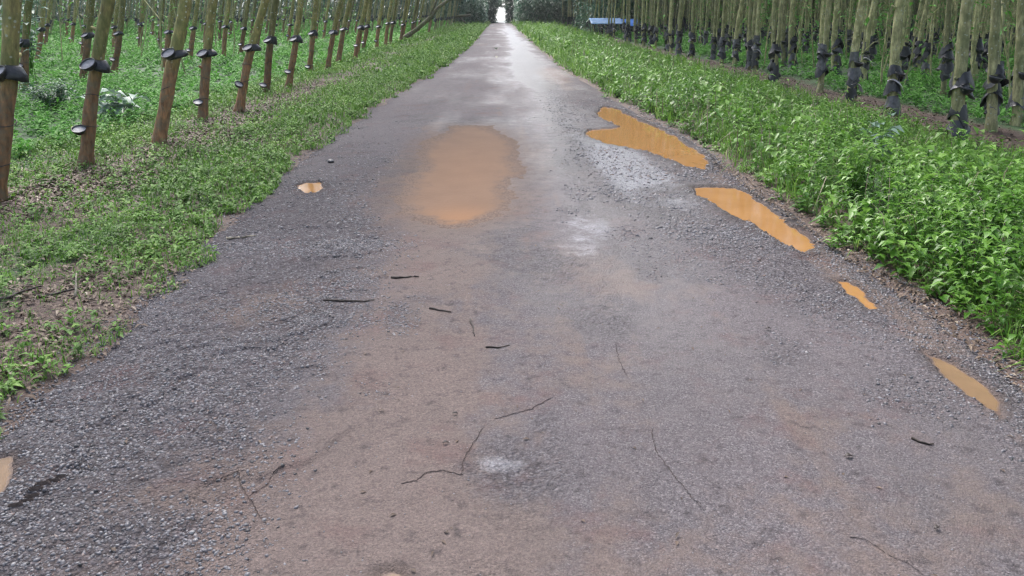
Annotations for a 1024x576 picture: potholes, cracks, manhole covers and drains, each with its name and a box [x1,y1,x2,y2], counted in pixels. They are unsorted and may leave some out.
pothole [288,180,331,195]
pothole [822,276,893,313]
pothole [576,106,719,172]
pothole [908,344,1024,423]
pothole [373,121,545,235]
crack [651,429,703,509]
crack [850,537,925,576]
pothole [681,183,831,257]
crack [401,397,553,484]
